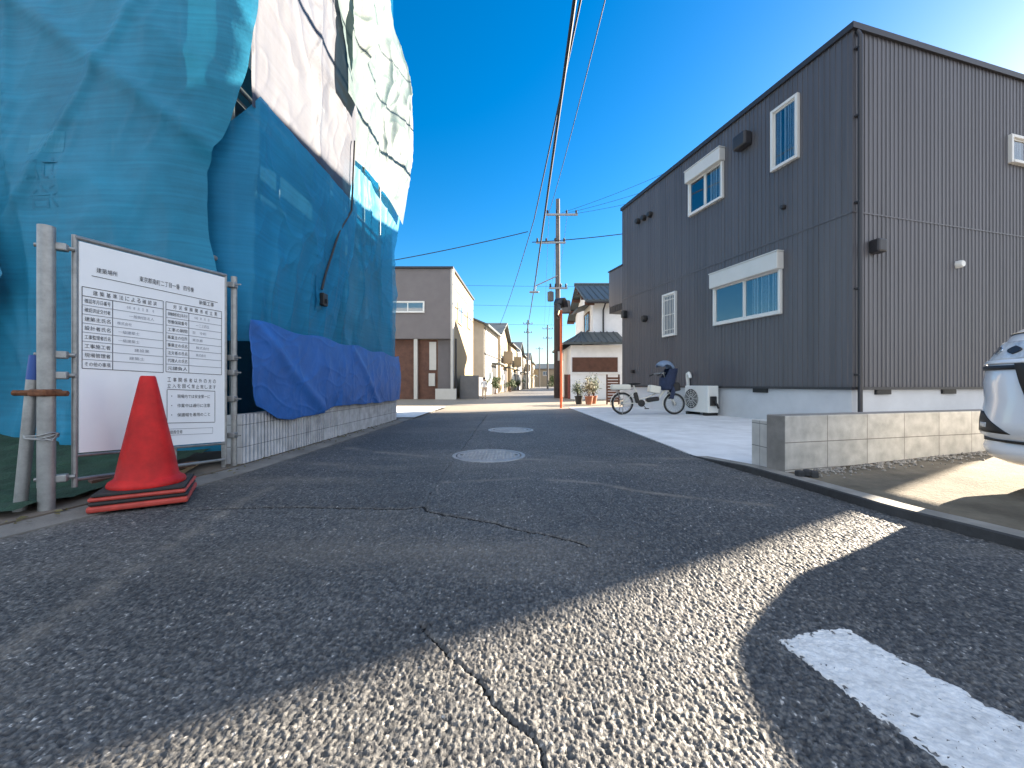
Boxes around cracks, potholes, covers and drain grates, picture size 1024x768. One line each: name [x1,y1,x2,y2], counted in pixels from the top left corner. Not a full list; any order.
crack [420,626,544,768]
crack [183,416,588,548]
manhole cover [452,449,525,463]
